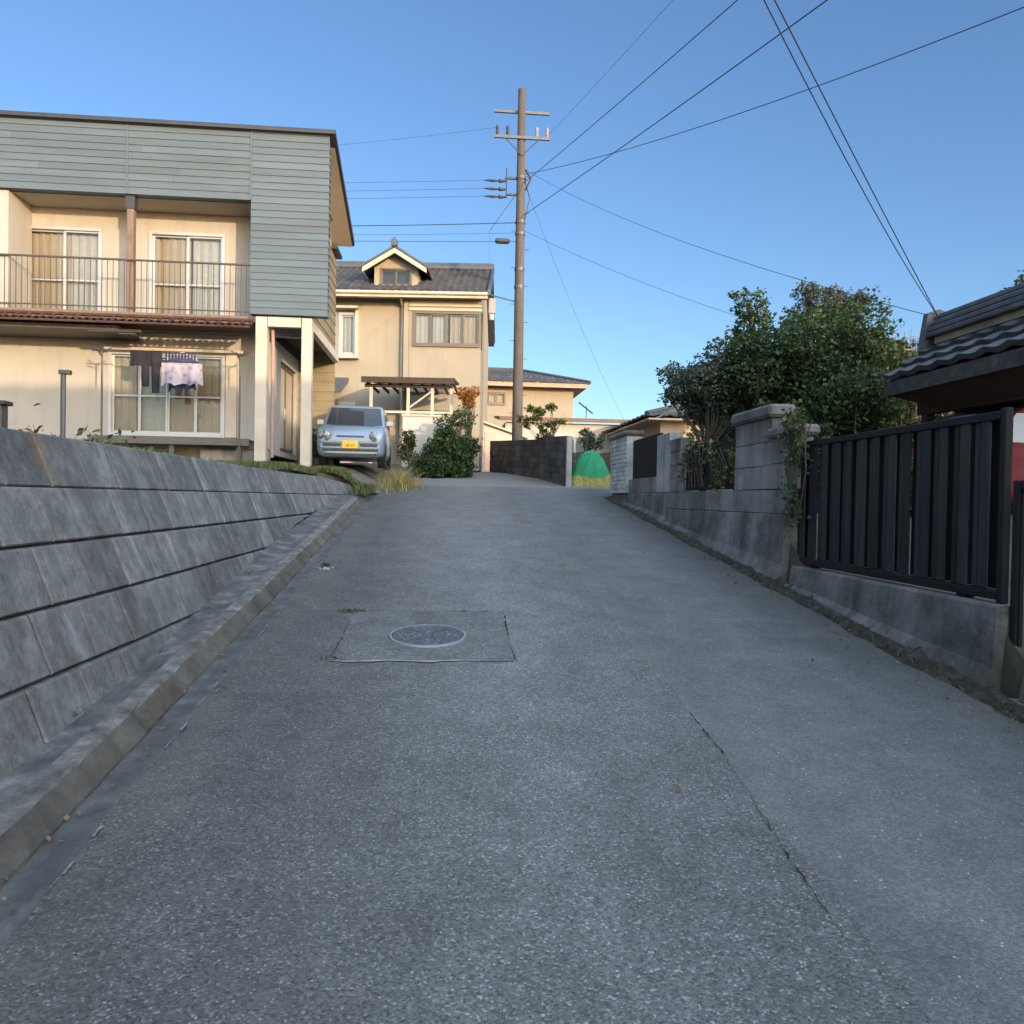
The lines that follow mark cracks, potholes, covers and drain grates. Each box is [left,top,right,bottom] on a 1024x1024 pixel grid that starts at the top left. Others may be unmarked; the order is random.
manhole cover [389,624,466,648]
